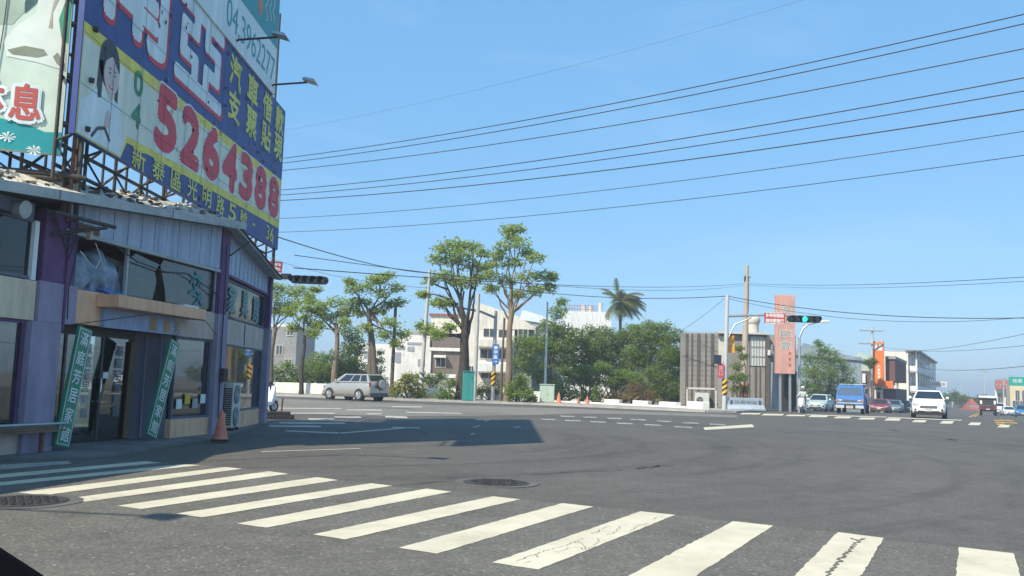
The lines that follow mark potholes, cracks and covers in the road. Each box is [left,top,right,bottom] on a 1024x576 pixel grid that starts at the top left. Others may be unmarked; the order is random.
crack [825,538,865,576]
crack [516,516,661,562]
manhole cover [0,494,84,510]
manhole cover [454,478,539,488]
